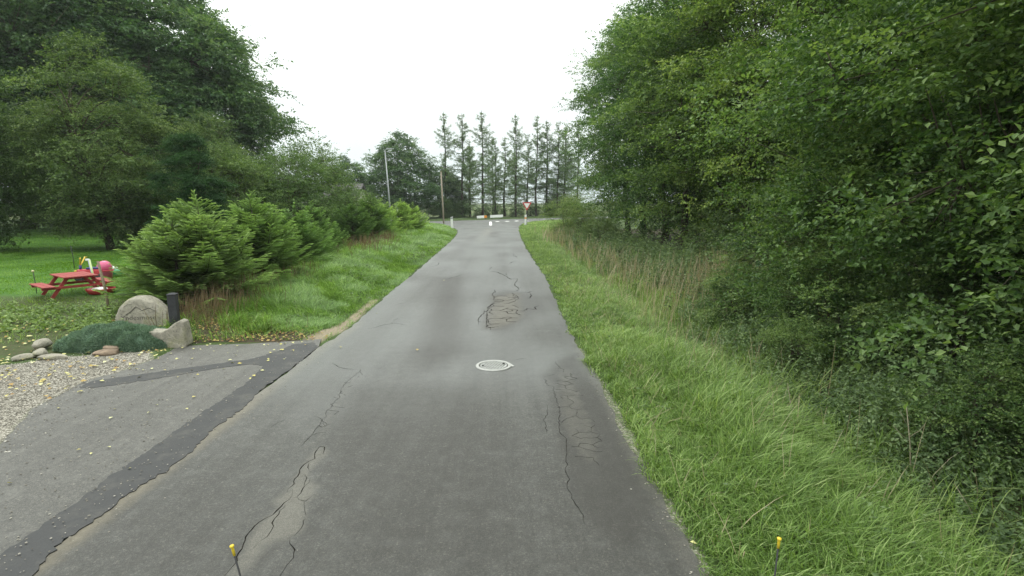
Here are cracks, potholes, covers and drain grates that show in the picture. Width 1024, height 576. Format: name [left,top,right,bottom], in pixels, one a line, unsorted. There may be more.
crack [478,255,537,330]
manhole cover [476,360,514,371]
crack [227,374,363,576]
crack [543,361,602,518]
